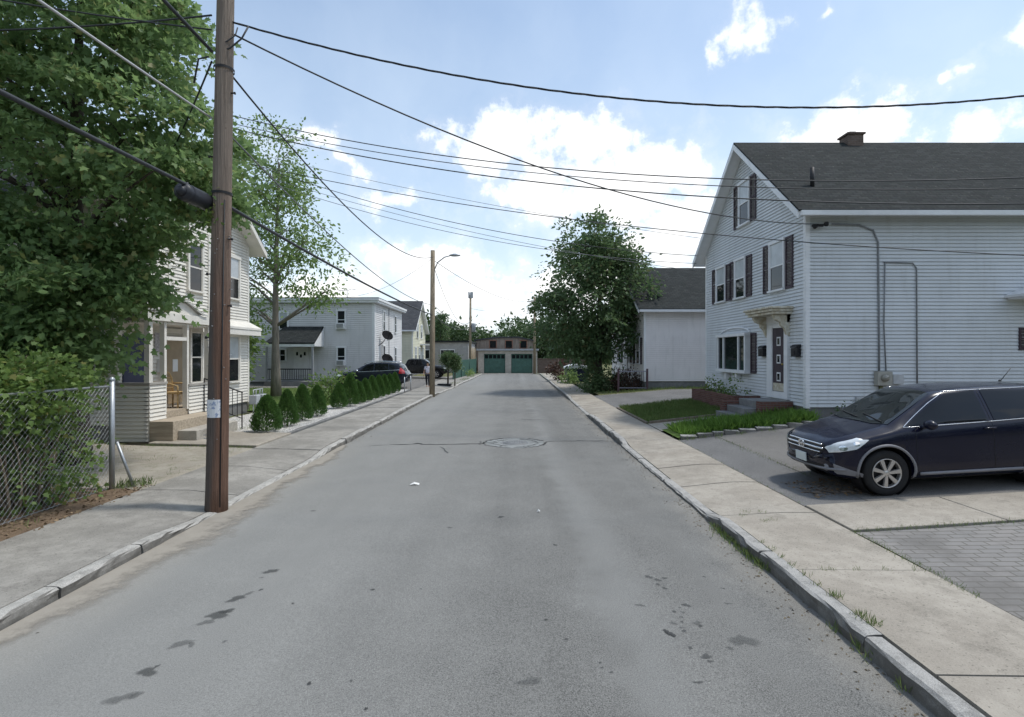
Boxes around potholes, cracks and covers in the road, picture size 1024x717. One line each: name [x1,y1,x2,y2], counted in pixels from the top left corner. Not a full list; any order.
crack [393,438,546,453]
manhole cover [486,438,543,448]
